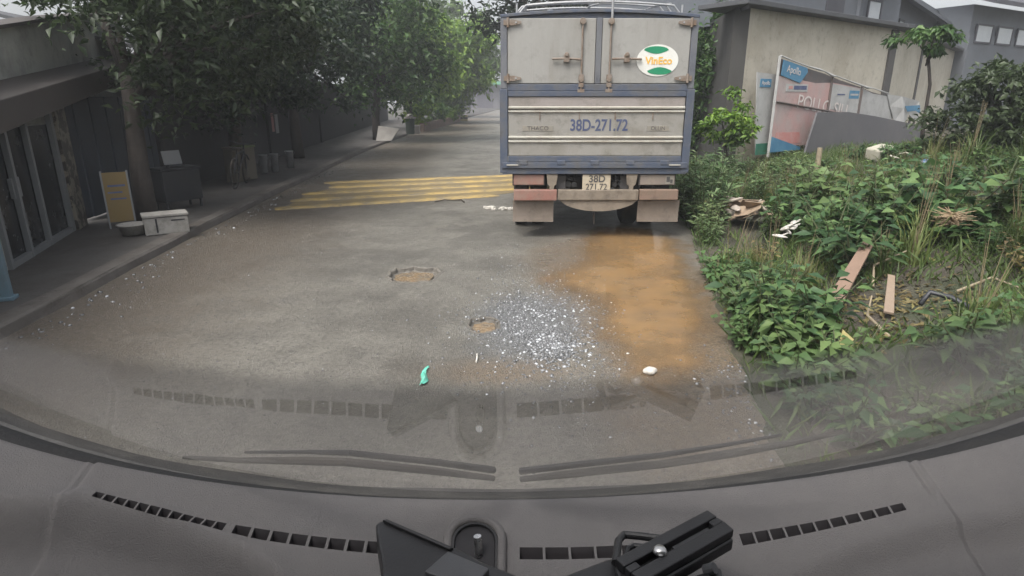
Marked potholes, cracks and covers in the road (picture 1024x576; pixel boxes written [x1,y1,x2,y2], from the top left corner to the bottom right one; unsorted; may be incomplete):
pothole [384,266,445,284]
pothole [467,317,501,334]
